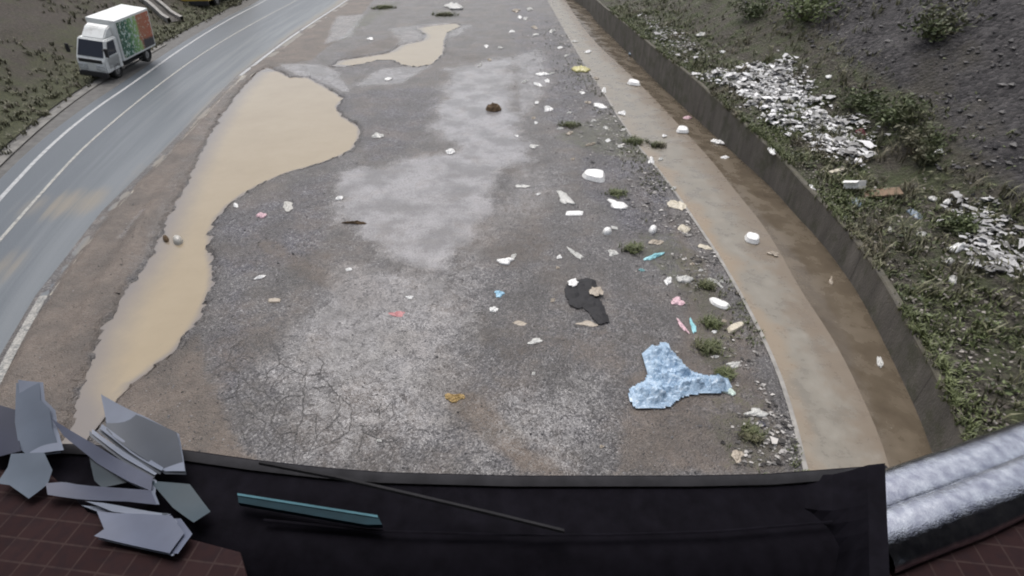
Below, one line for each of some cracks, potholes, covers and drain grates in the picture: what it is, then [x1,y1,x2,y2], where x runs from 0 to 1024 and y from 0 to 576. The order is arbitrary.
pothole [332,22,461,67]
pothole [58,66,364,444]
crack [215,340,437,460]
